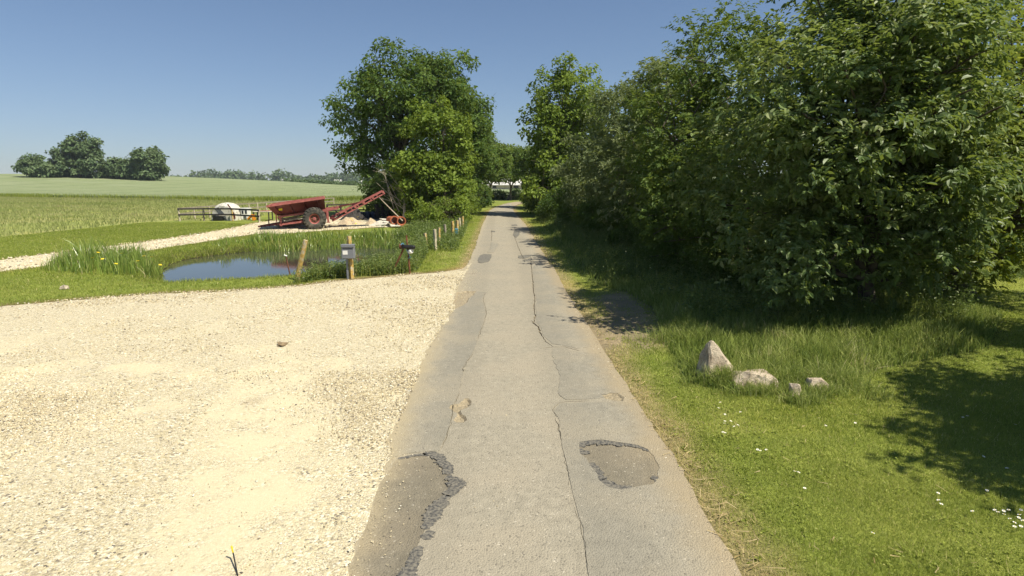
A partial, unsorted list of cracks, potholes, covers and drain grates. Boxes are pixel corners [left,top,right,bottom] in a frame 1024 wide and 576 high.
crack [514,236,579,351]
pothole [449,398,472,423]
